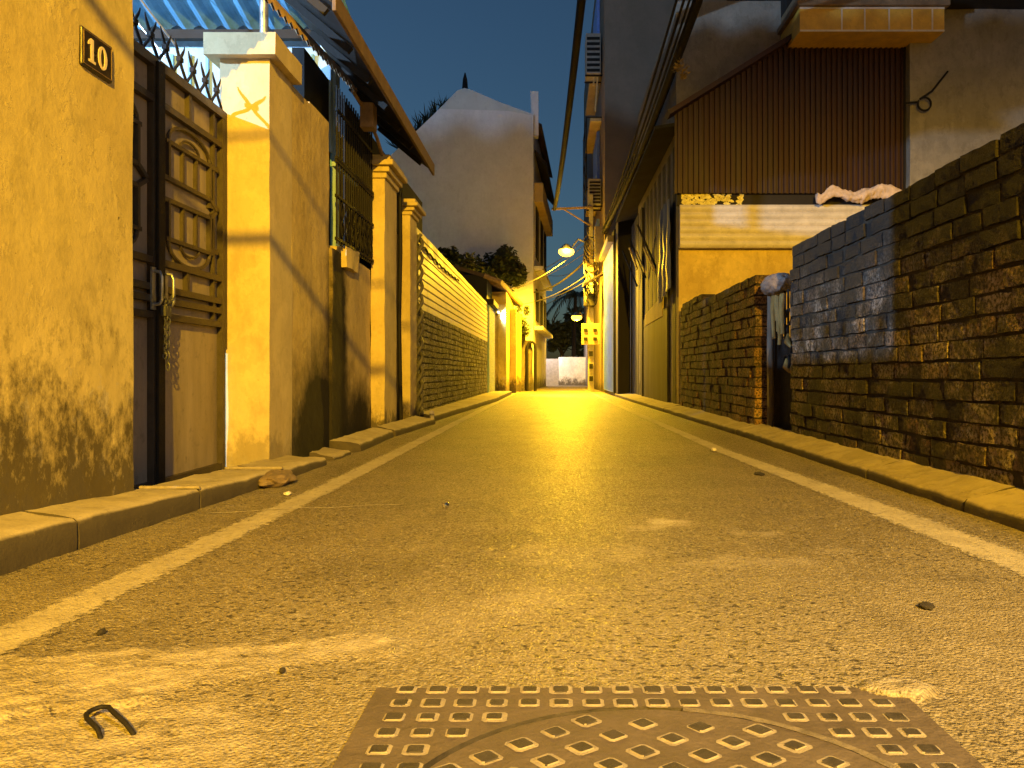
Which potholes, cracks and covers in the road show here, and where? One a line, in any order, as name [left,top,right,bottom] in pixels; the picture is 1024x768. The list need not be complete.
manhole cover [332,685,985,768]
